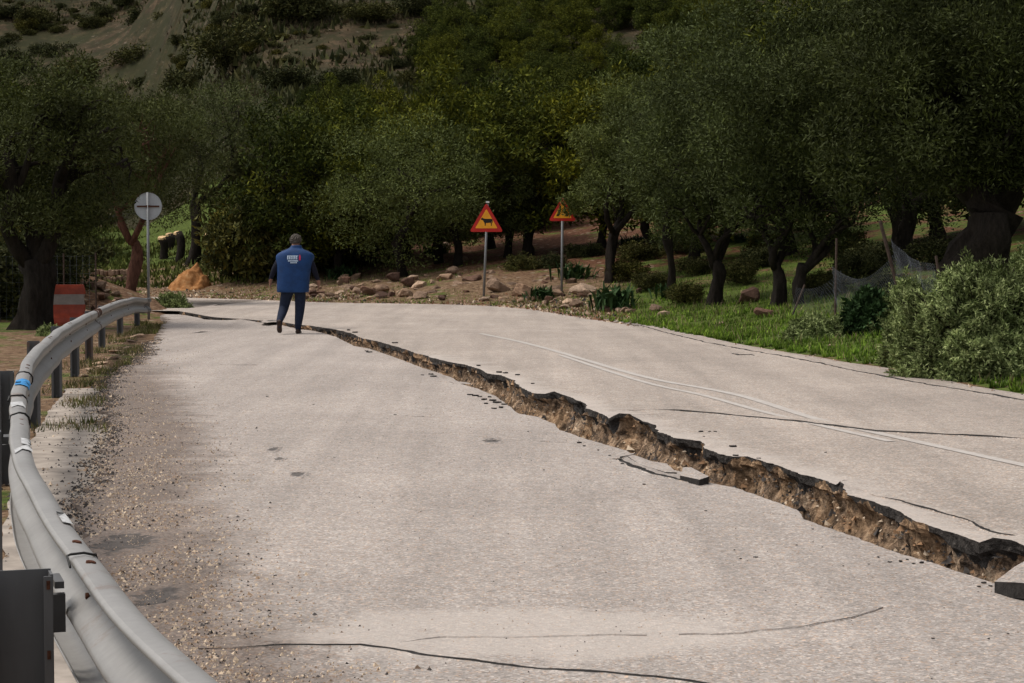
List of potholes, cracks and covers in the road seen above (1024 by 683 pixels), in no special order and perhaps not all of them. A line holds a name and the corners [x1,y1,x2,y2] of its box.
crack [172,304,1024,583]
crack [198,605,883,683]
